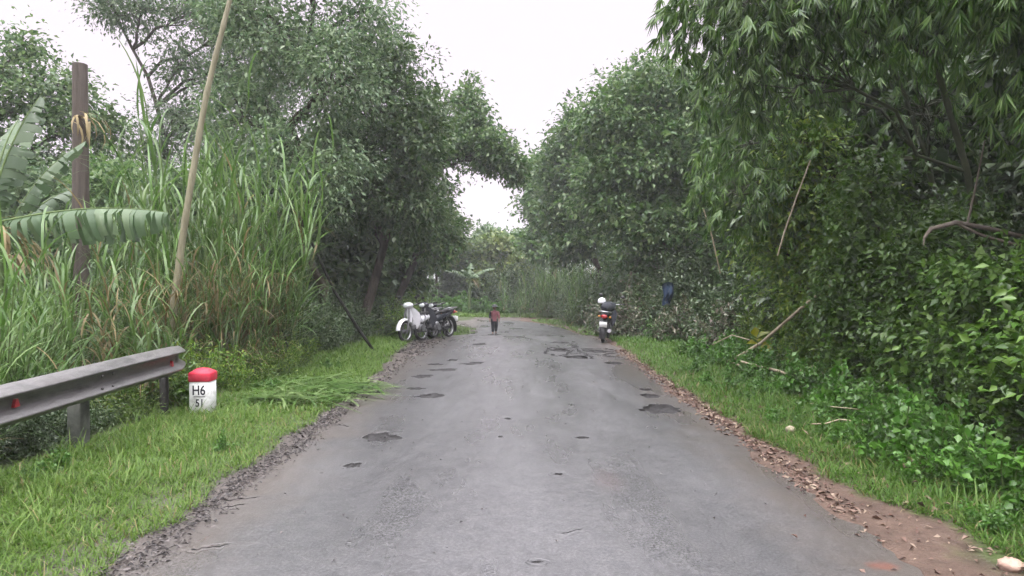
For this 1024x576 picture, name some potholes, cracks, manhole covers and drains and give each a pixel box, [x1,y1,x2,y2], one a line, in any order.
pothole [360,431,405,443]
pothole [636,404,683,414]
crack [555,527,588,536]
